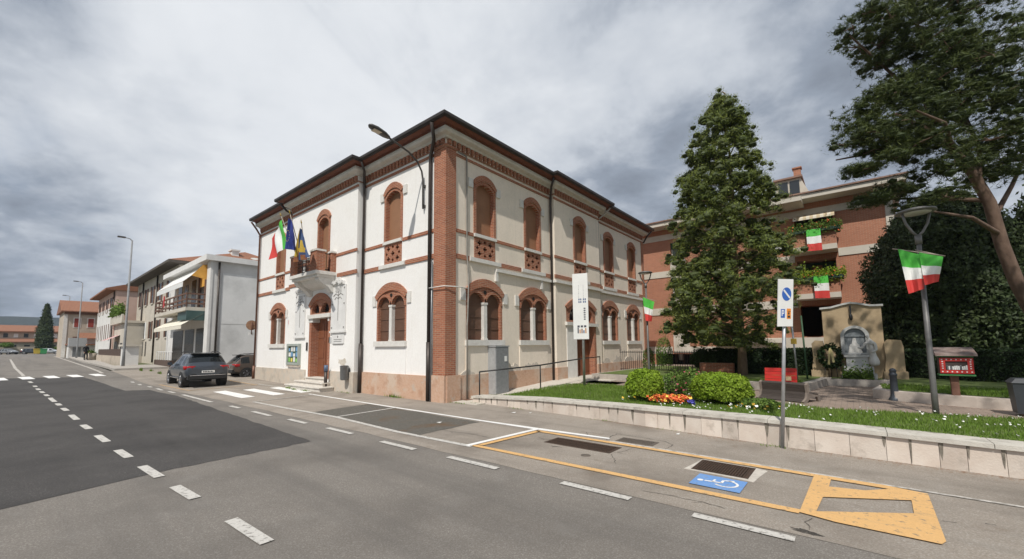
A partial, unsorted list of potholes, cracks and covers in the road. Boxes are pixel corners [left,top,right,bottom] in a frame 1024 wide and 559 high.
drain grate [615,437,659,446]
drain grate [684,459,768,482]
drain grate [545,437,622,453]
